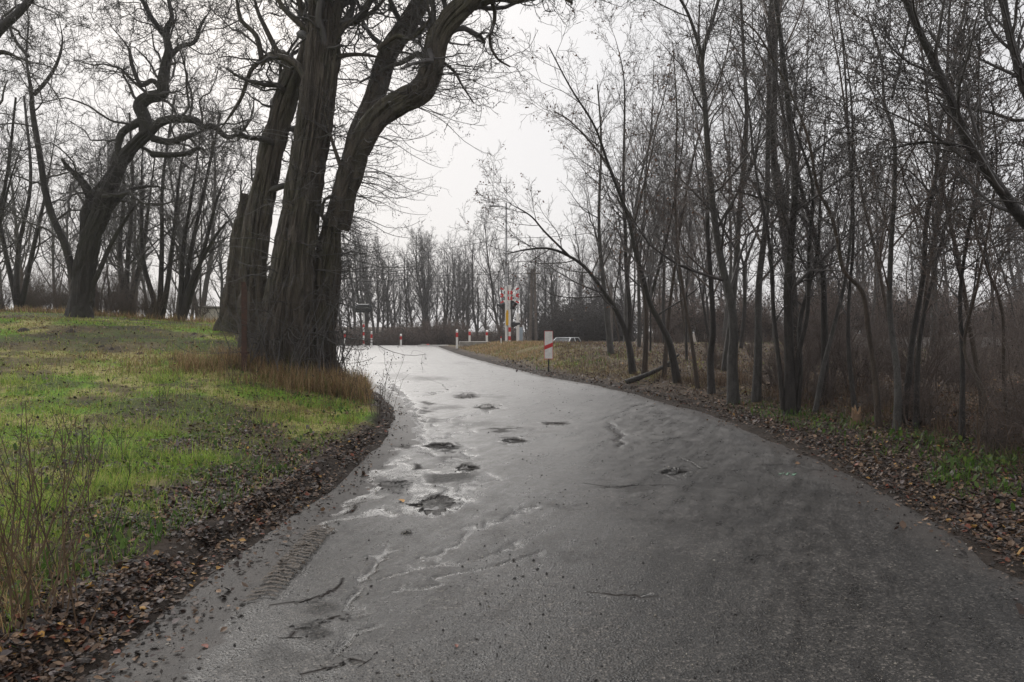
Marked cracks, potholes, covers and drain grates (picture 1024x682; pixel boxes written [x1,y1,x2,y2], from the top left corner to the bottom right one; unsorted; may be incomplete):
pothole [418,441,464,452]
crack [269,577,372,680]
pothole [398,490,464,520]
pothole [370,478,414,494]
pothole [470,403,500,412]
crack [580,455,708,489]
pothole [456,392,479,400]
pothole [655,465,698,482]
crack [585,589,664,602]
pothole [452,462,480,474]
